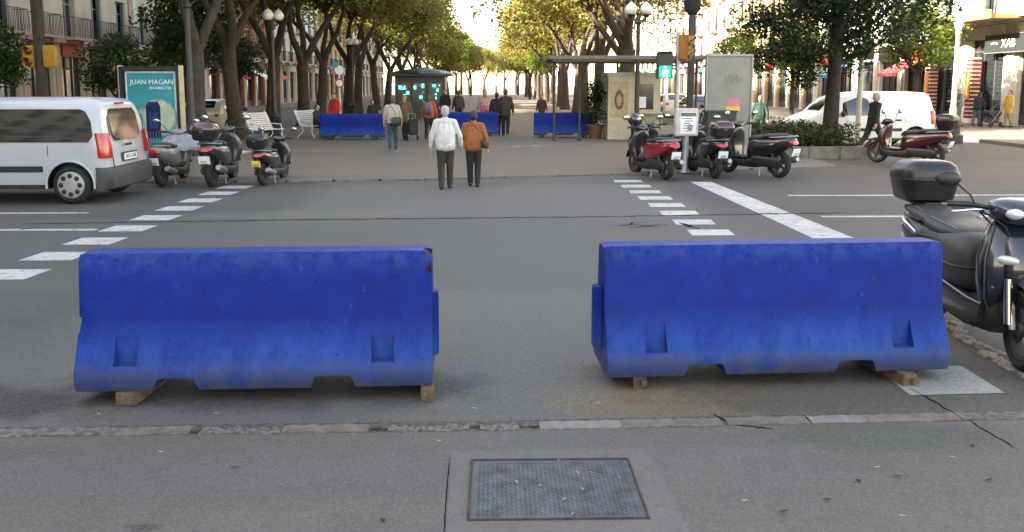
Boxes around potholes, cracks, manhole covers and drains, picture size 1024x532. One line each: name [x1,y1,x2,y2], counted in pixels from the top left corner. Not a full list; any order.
crack [713,414,774,429]
manhole cover [467,457,650,521]
crack [909,388,1016,449]
